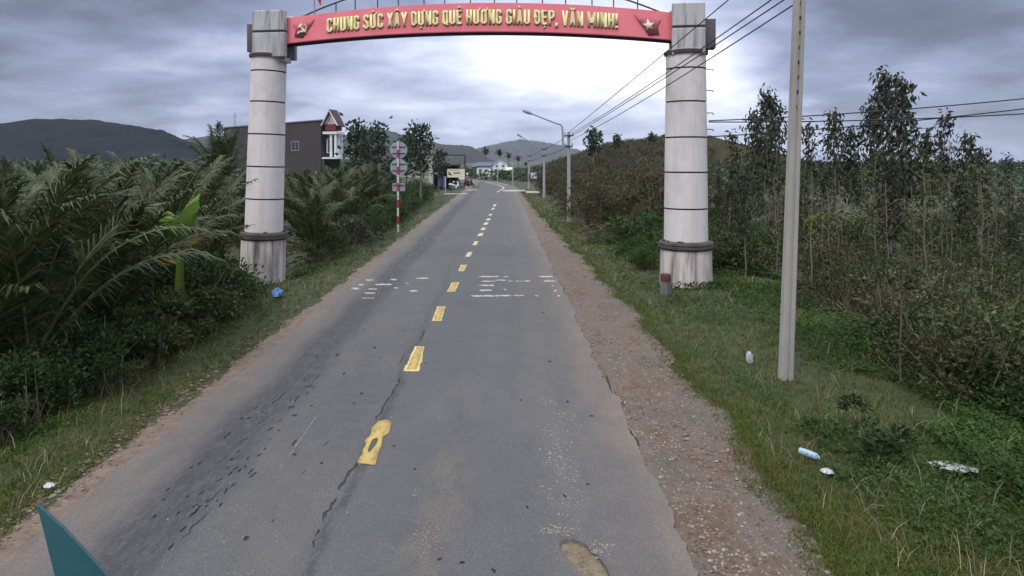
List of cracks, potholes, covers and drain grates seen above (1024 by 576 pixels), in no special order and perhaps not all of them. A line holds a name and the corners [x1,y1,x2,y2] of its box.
crack [182,488,222,538]
crack [375,331,425,420]
crack [312,440,358,547]
pothole [559,538,610,576]
